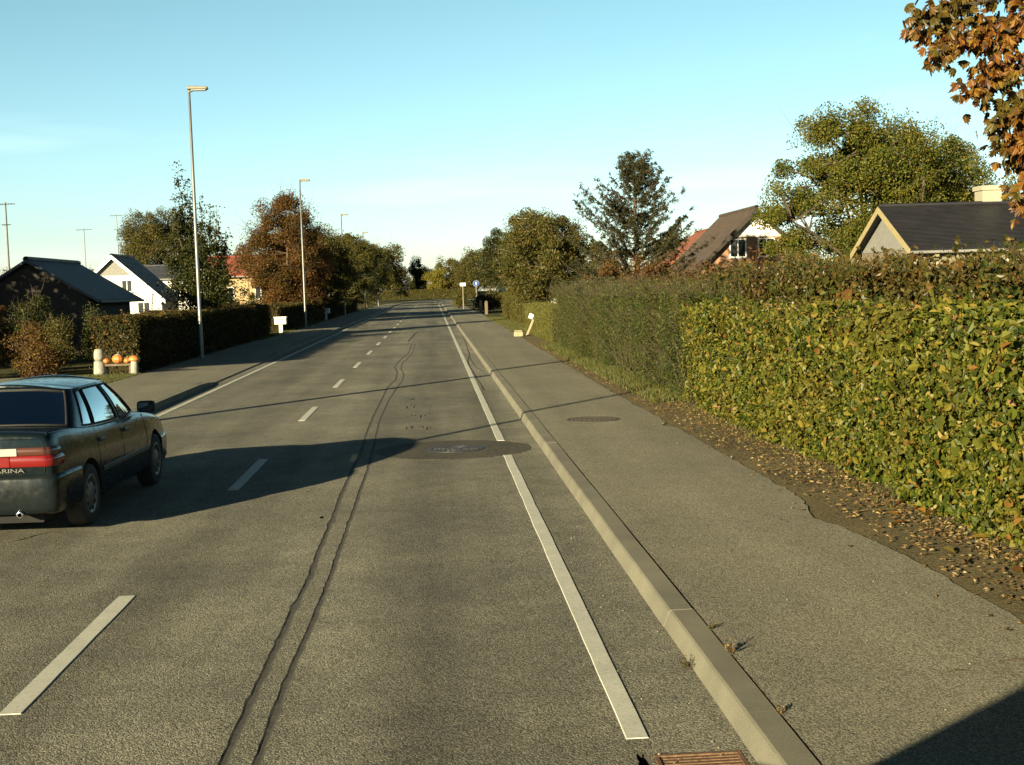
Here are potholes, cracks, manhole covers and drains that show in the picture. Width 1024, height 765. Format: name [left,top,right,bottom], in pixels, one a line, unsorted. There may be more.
drain grate [653,750,750,765]
manhole cover [427,445,485,453]
